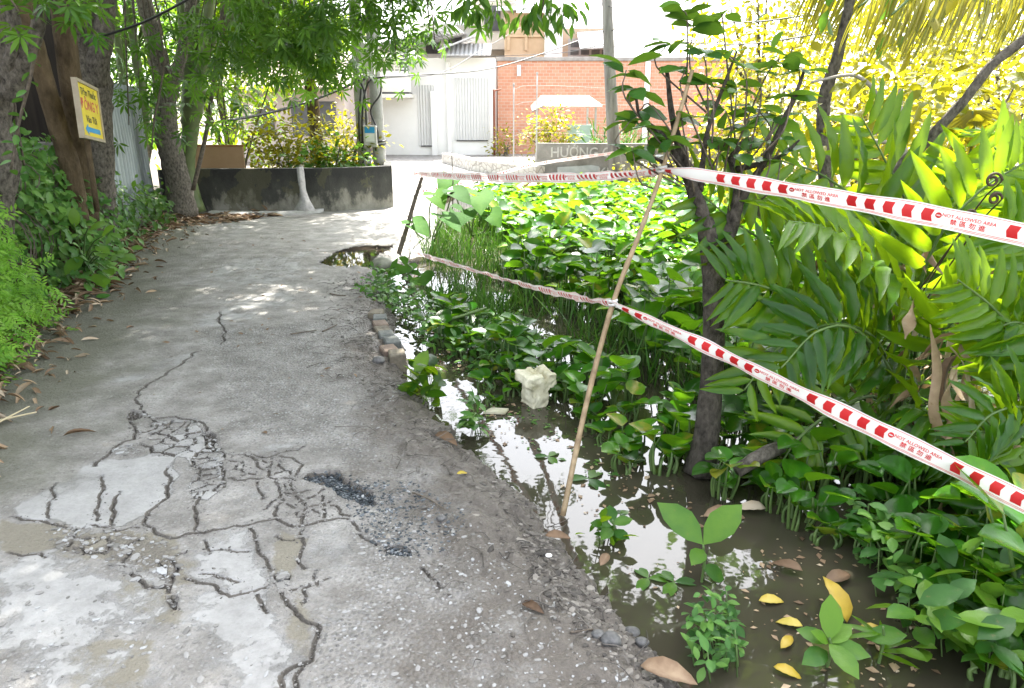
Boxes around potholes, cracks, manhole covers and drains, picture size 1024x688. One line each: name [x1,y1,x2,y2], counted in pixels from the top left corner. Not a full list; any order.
pothole [377,541,417,558]
pothole [314,244,396,269]
crack [10,312,379,688]
pothole [293,468,382,509]
